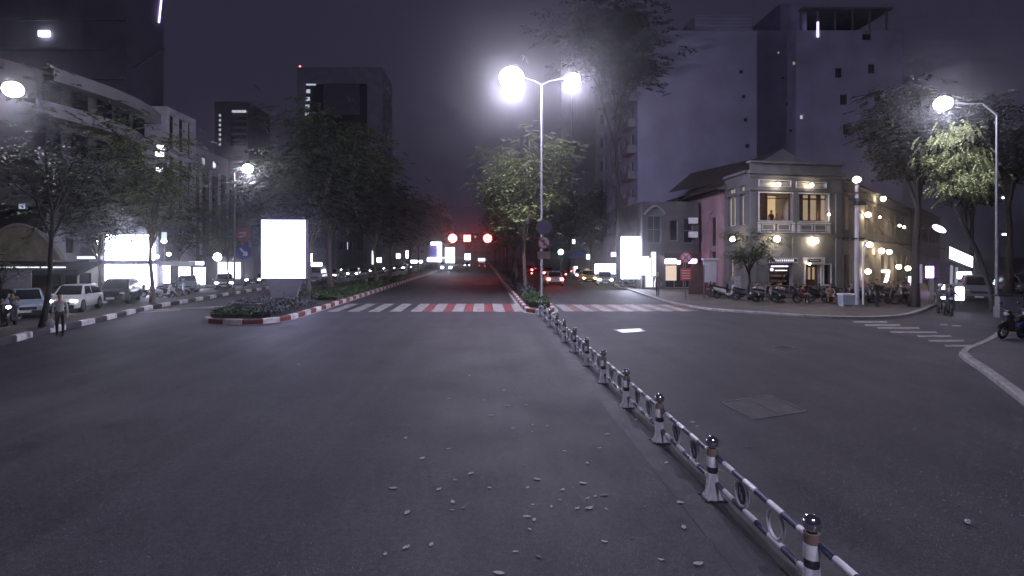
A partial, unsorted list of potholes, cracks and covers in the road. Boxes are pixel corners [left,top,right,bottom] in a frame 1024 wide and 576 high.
manhole cover [720,395,808,420]
